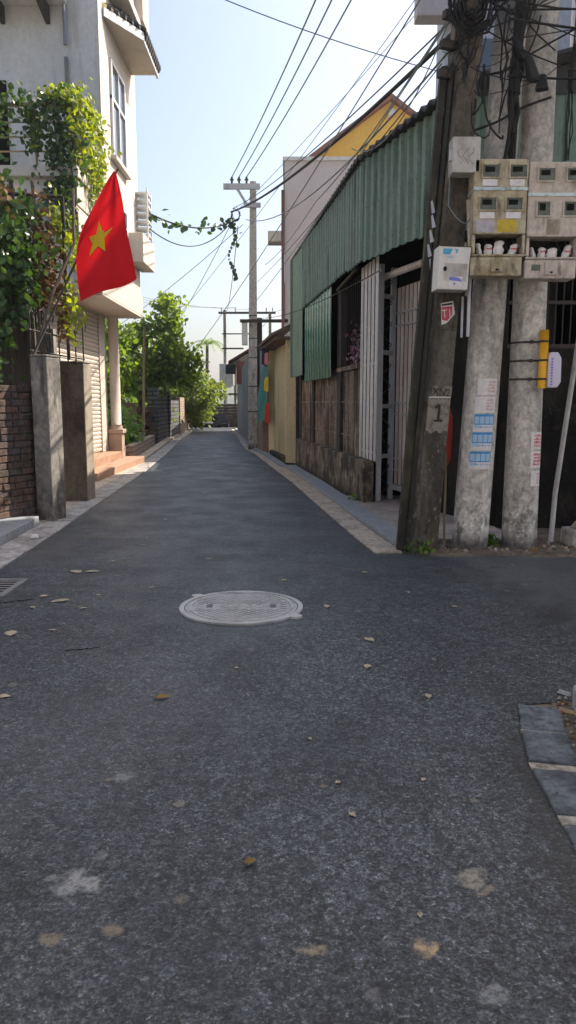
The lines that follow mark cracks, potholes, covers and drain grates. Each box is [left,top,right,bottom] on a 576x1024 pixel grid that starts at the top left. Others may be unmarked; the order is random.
drain grate [0,578,29,597]
manhole cover [179,591,303,626]
